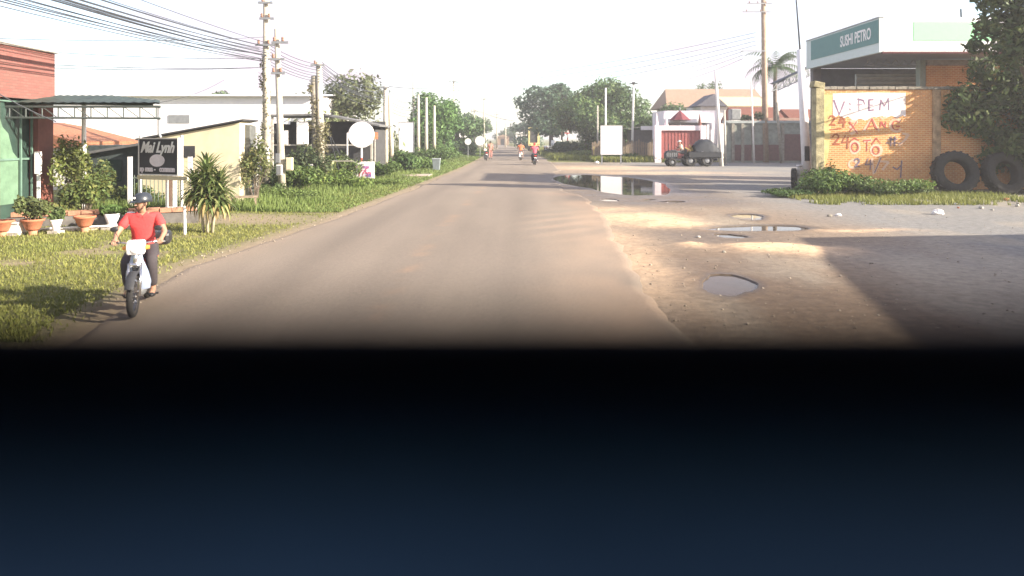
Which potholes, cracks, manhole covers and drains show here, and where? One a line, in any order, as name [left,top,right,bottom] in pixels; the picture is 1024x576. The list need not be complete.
pothole [717,213,777,222]
pothole [677,270,784,302]
pothole [691,224,826,233]
pothole [552,174,681,197]
